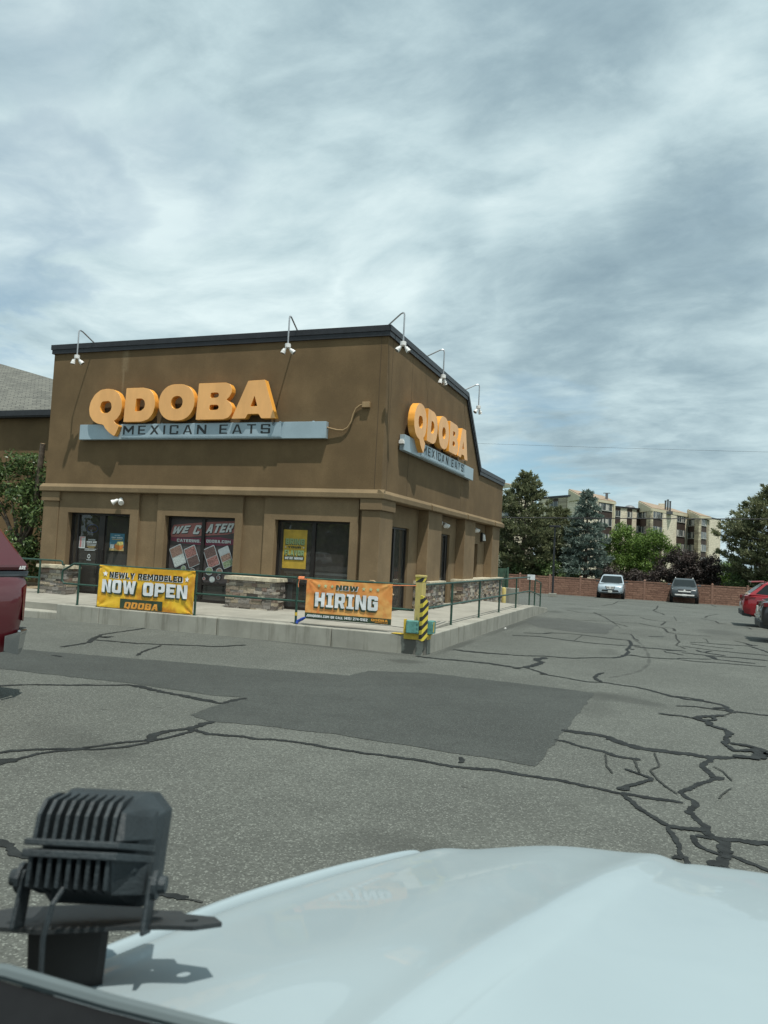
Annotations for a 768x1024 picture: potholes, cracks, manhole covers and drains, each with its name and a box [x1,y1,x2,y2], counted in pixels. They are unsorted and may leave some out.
crack [417,656,765,715]
crack [51,628,243,657]
crack [513,601,768,667]
crack [555,739,641,760]
